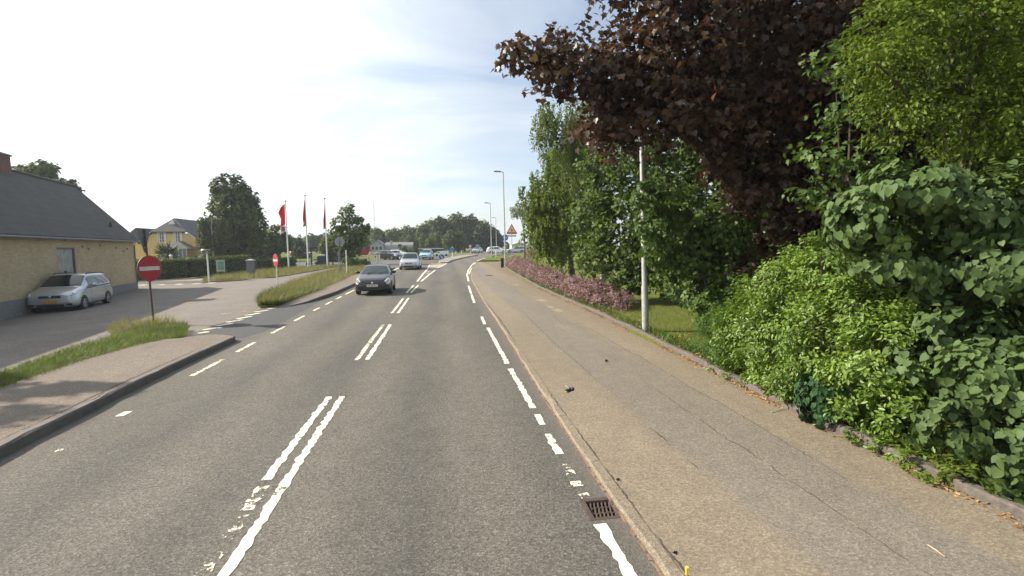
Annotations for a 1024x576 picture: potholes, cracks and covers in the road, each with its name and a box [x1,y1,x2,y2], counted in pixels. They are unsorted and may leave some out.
drain grate [579,497,623,521]
